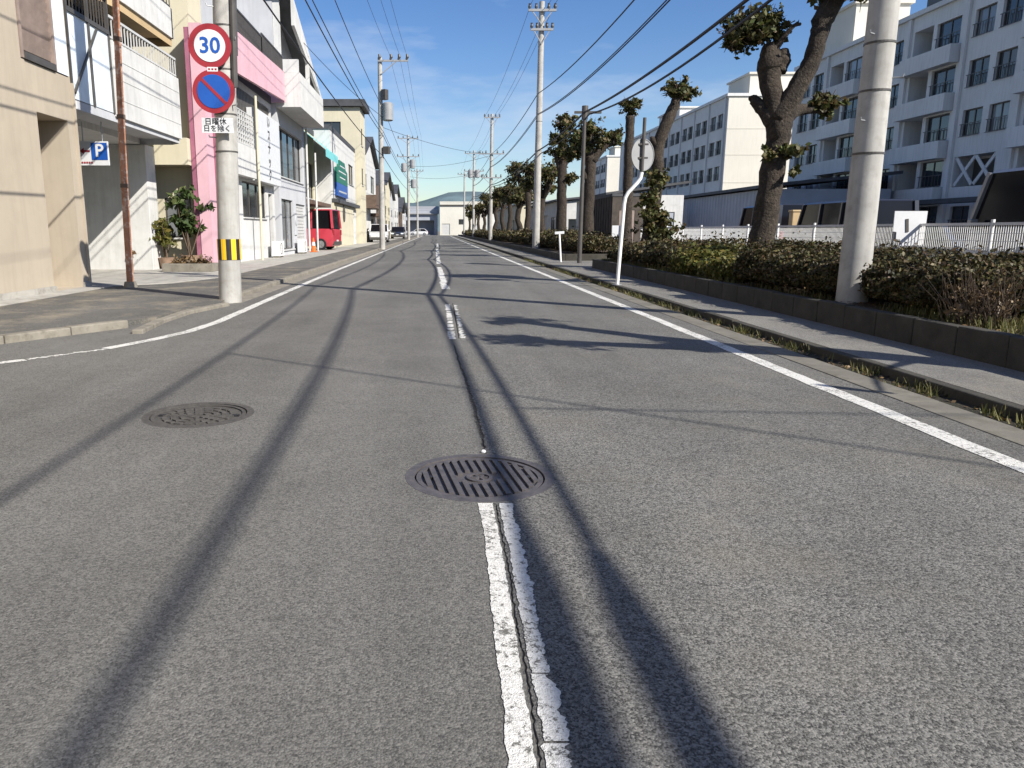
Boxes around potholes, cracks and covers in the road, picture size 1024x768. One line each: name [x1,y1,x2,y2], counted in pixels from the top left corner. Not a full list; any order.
manhole cover [405,454,554,502]
manhole cover [141,402,254,428]
